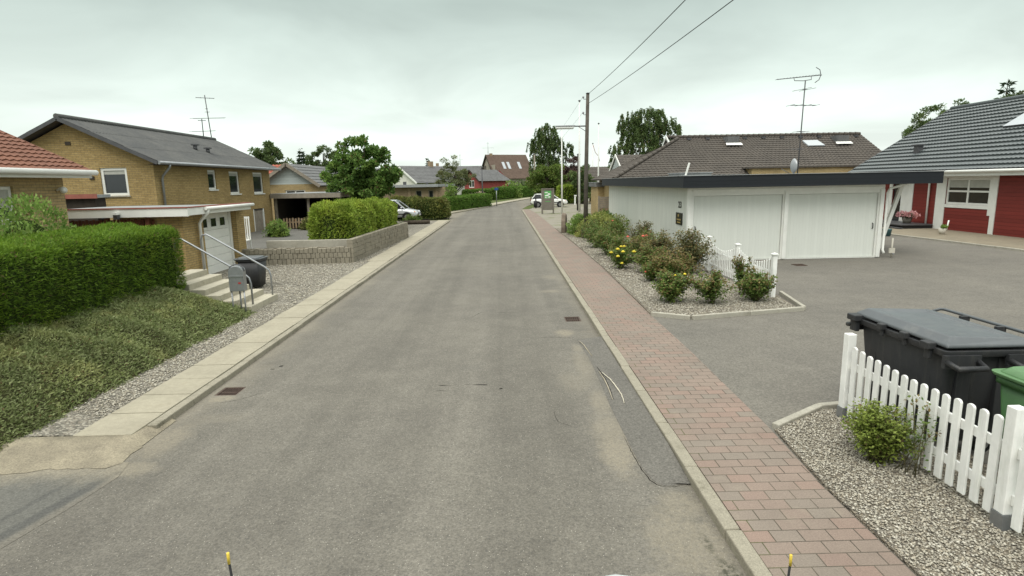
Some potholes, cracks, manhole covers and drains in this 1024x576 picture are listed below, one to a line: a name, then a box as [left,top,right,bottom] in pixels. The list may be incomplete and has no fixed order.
crack [581,342,625,403]
drain grate [215,387,246,396]
